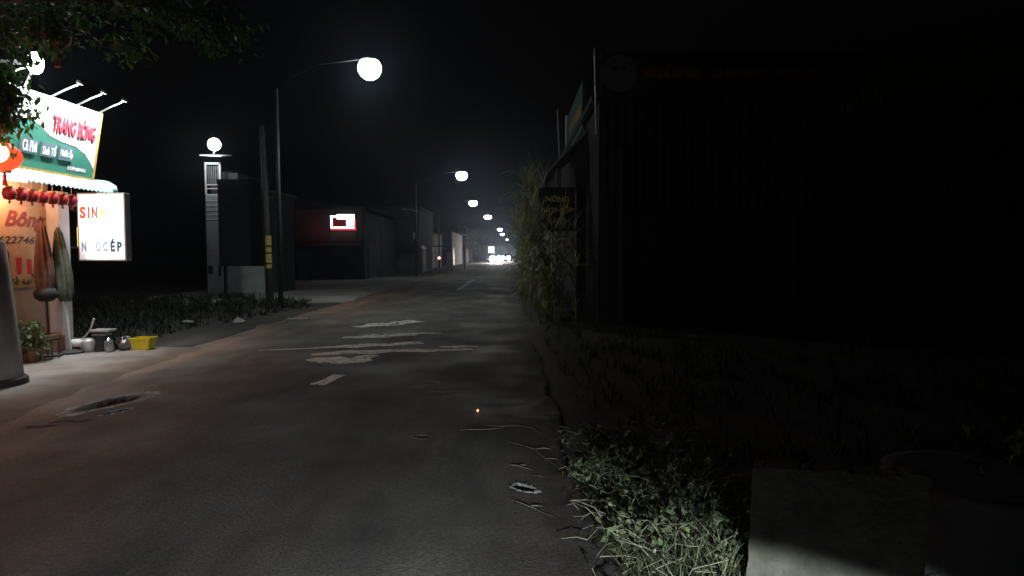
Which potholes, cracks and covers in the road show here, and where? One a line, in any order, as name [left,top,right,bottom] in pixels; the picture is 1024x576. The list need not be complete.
crack [460,424,559,478]
crack [512,498,556,517]
pothole [54,391,161,418]
pothole [509,482,542,494]
crack [25,419,92,427]
